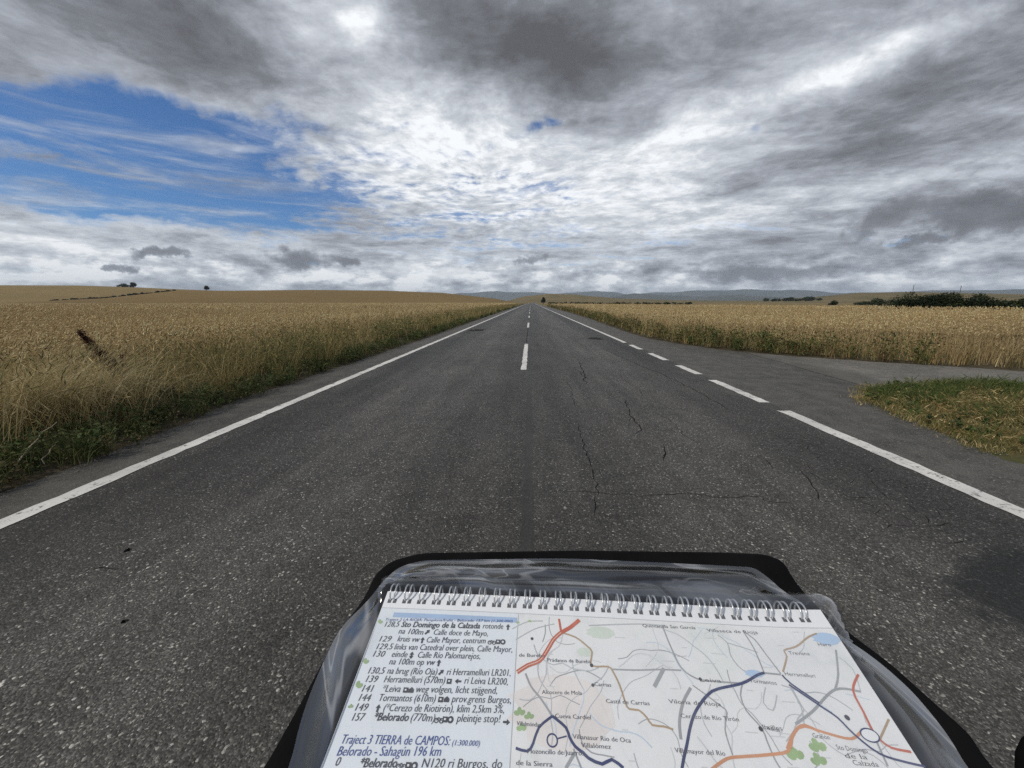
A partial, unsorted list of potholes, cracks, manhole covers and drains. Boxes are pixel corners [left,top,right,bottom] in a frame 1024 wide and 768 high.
crack [604,349,724,434]
crack [559,362,972,544]
